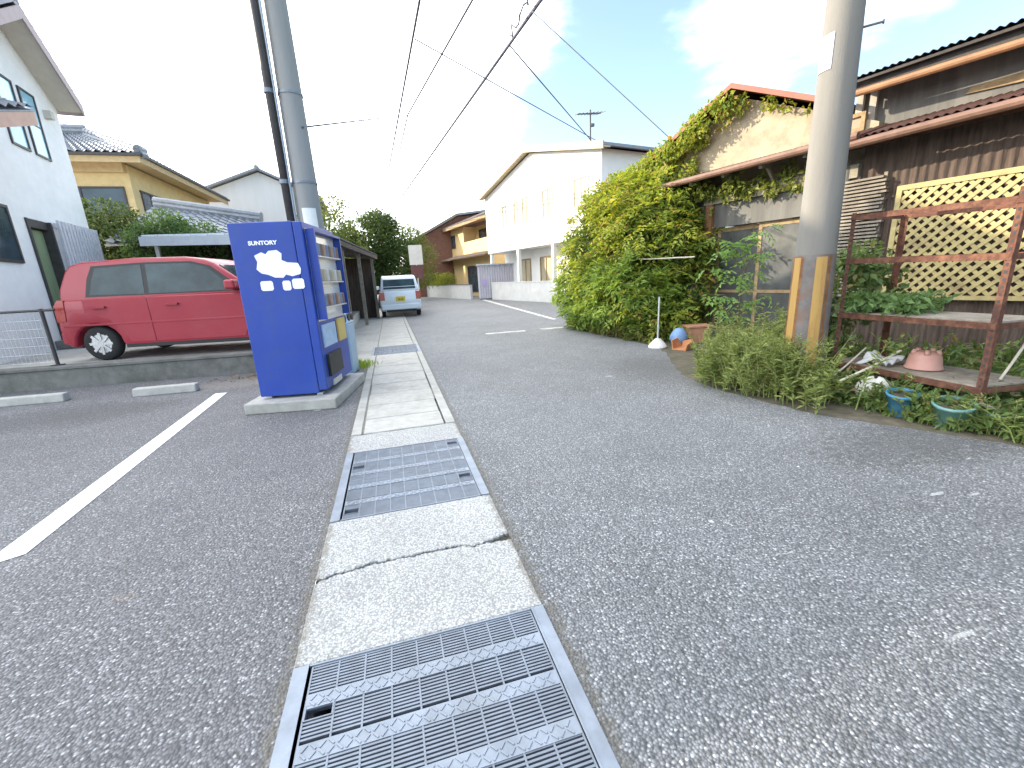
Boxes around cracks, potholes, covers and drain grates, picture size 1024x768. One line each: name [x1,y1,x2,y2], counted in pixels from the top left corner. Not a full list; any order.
crack [316,535,510,584]
drain grate [330,437,489,523]
drain grate [269,605,620,768]
drain grate [371,344,421,356]
